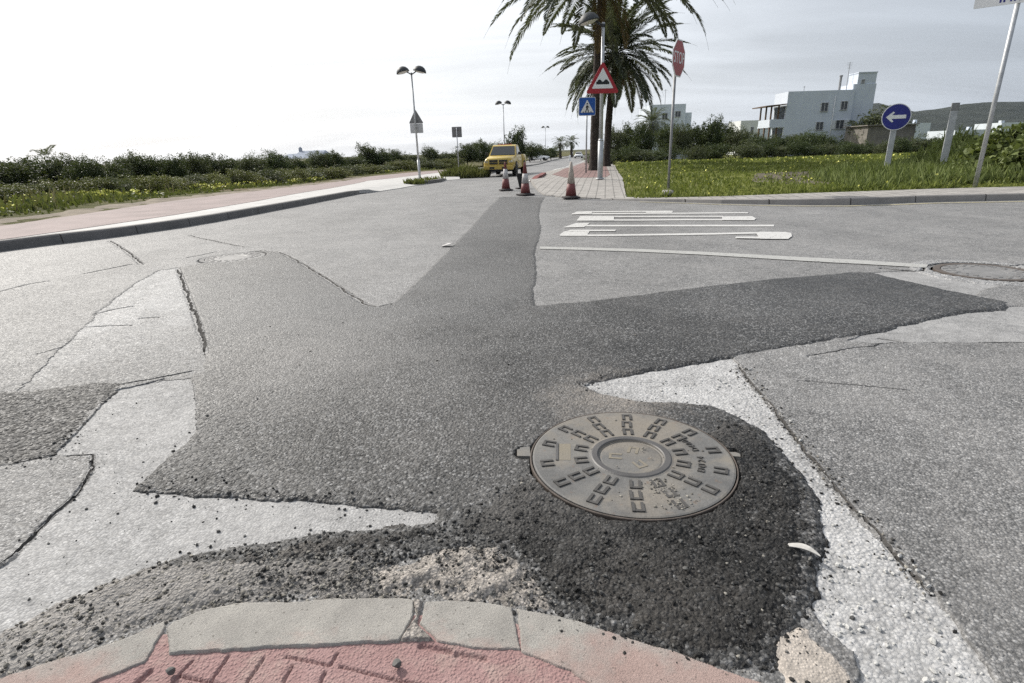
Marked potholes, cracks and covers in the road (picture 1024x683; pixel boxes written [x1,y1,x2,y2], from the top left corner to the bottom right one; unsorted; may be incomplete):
crack [121,372,189,384]
manhole cover [517,412,741,523]
crack [0,241,144,292]
manhole cover [933,263,1024,282]
crack [737,339,1024,596]
manhole cover [199,252,265,263]
crack [87,236,262,355]
